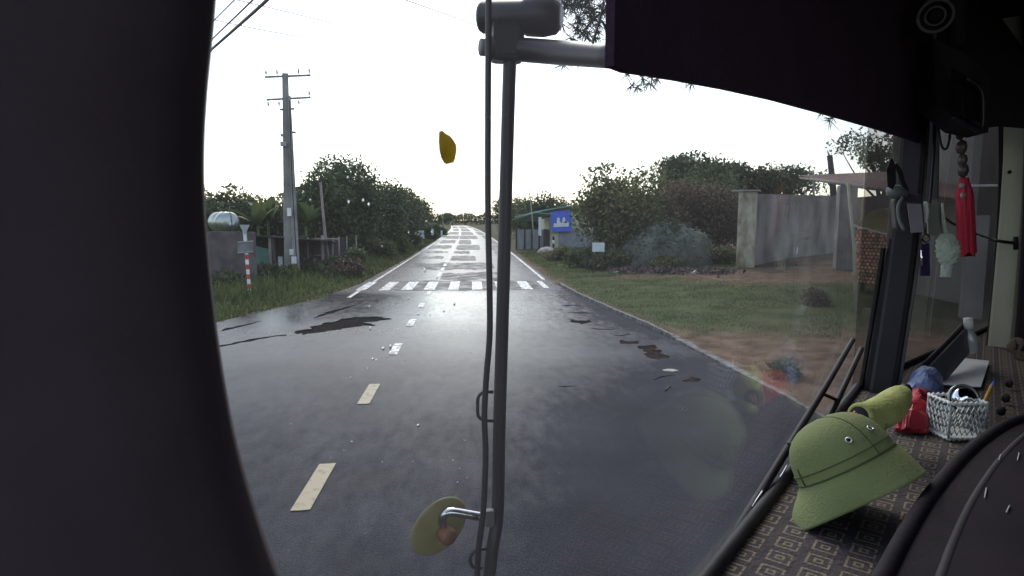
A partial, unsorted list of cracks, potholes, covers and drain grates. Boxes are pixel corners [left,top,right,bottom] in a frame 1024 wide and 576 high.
crack [220,321,287,347]
pothole [637,345,670,360]
pothole [288,316,391,336]
crack [315,305,356,318]
